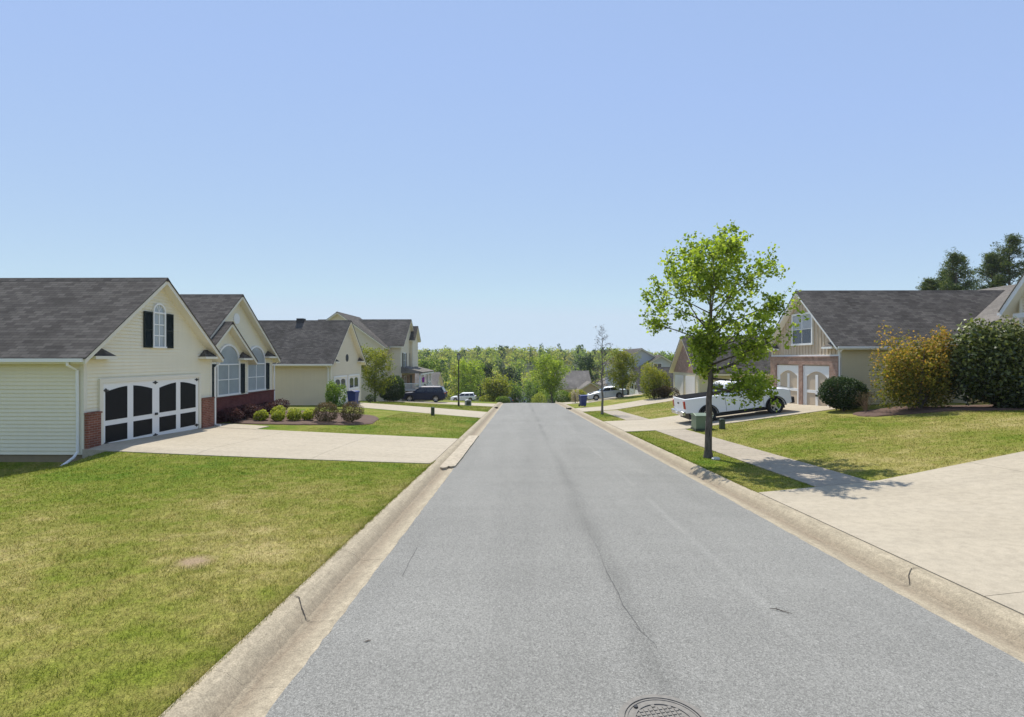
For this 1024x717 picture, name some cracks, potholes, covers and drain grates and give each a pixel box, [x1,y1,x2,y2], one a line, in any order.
crack [583,517,657,647]
manhole cover [619,694,707,717]
